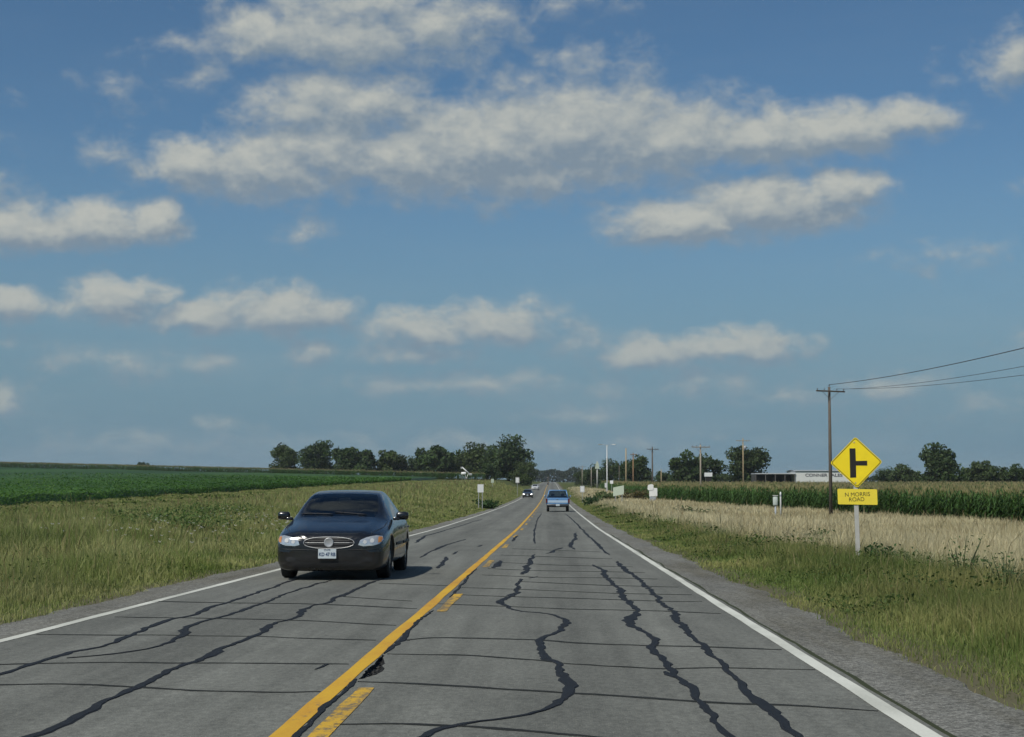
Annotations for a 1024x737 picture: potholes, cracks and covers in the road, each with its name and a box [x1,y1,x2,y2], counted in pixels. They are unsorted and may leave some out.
crack [0,549,878,711]
pothole [359,655,385,679]
